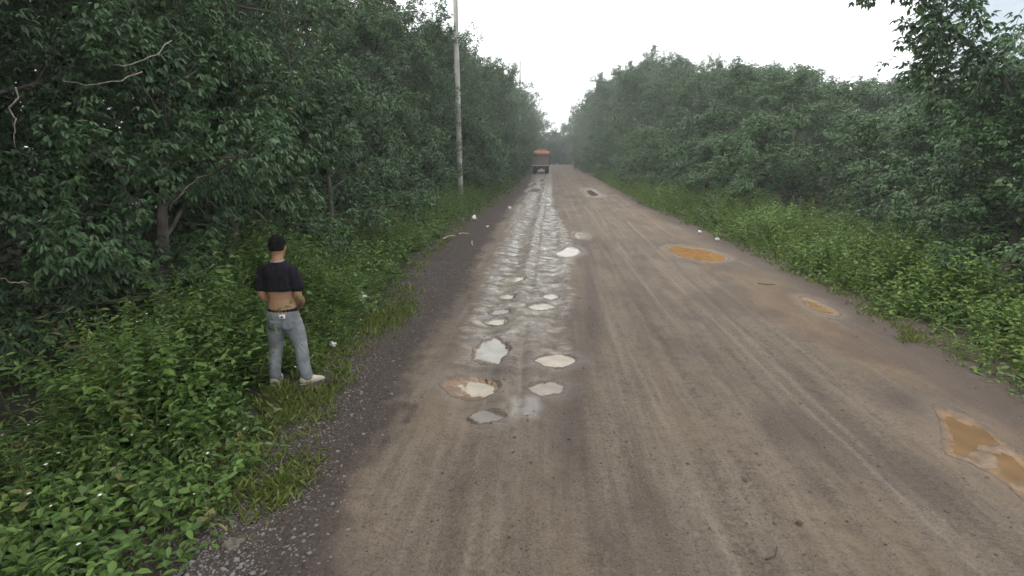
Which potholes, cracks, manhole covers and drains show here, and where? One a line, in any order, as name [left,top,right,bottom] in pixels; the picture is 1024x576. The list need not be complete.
pothole [581,187,606,198]
pothole [481,317,510,327]
pothole [486,308,512,316]
pothole [531,353,579,370]
pothole [471,335,514,366]
pothole [552,245,583,258]
pothole [933,404,1024,501]
pothole [526,301,558,311]
pothole [798,295,842,317]
pothole [523,380,567,397]
pothole [665,245,730,262]
pothole [499,275,528,284]
